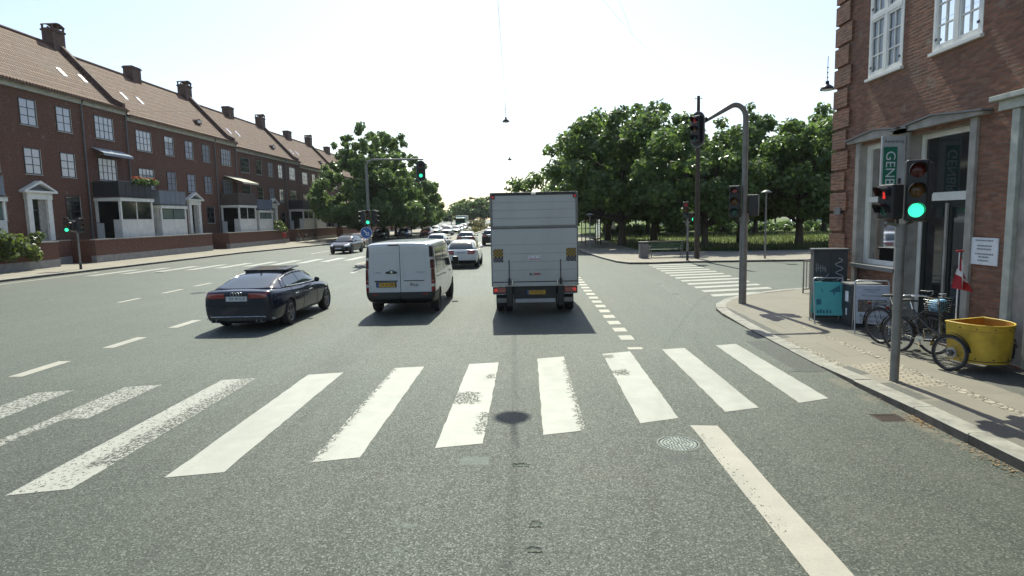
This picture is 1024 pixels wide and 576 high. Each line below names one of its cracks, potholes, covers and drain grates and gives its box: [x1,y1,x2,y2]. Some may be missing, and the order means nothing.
drain grate [870,414,909,422]
manhole cover [656,436,700,451]
